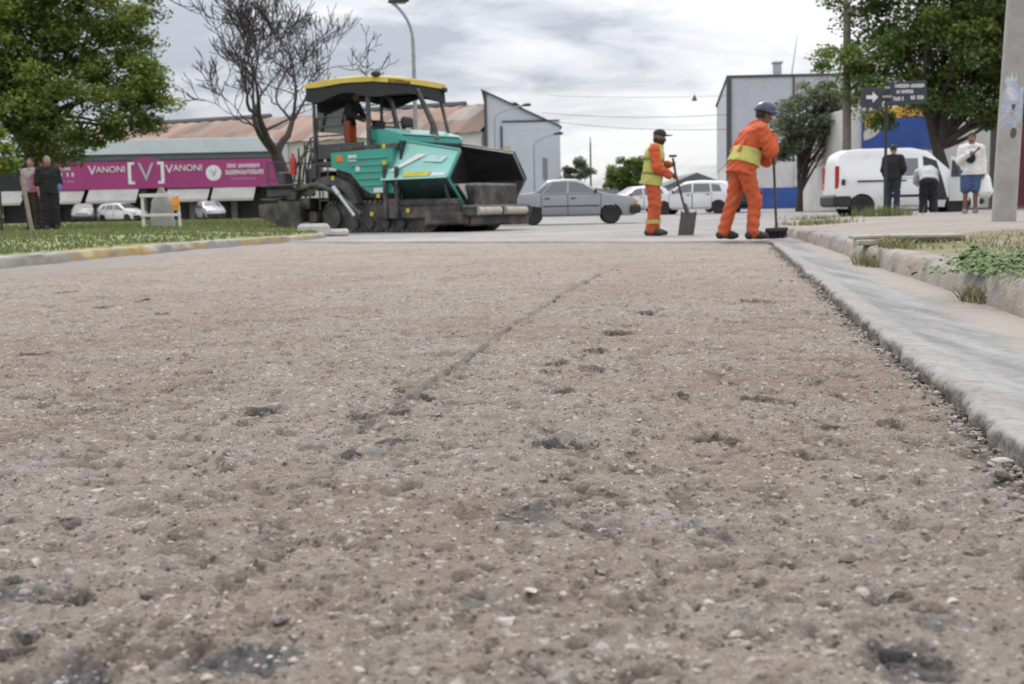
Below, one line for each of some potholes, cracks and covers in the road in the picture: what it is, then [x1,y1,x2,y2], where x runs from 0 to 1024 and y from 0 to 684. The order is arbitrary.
pothole [565,440,586,453]
pothole [523,435,575,452]
crack [357,273,603,435]
pothole [0,574,29,589]
pothole [52,587,98,608]
pothole [873,644,958,670]
